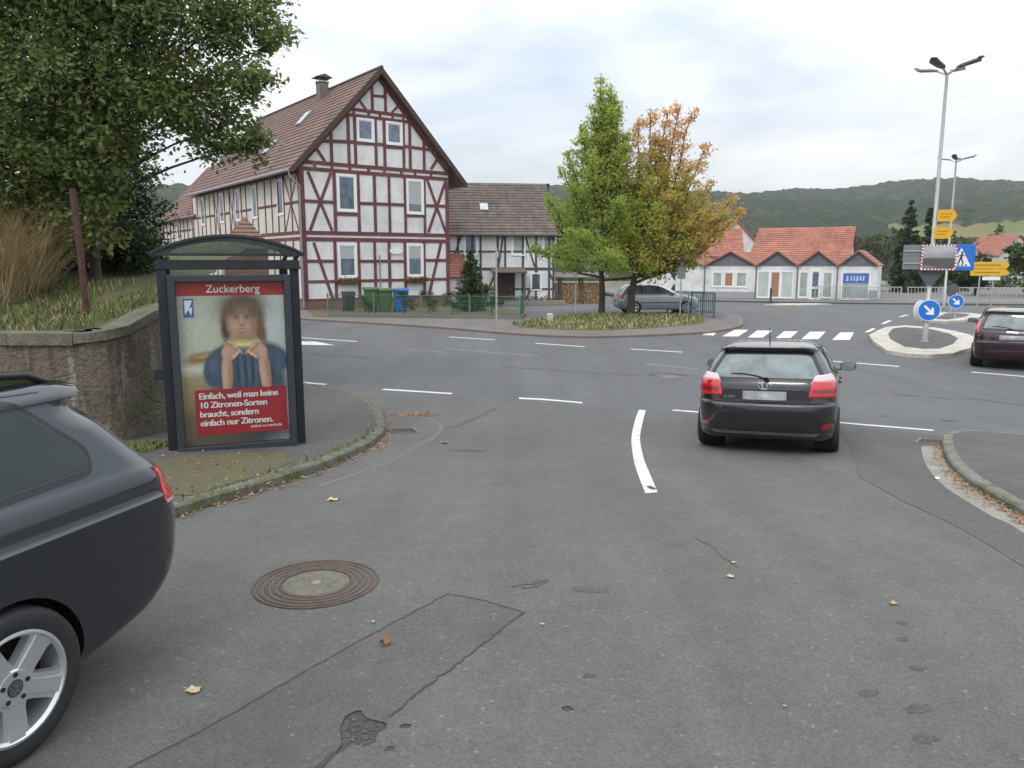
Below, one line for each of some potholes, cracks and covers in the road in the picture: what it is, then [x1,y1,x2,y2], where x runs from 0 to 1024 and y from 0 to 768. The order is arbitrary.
manhole cover [251,560,379,610]
pothole [335,711,387,754]
crack [444,407,498,429]
crack [694,537,739,567]
